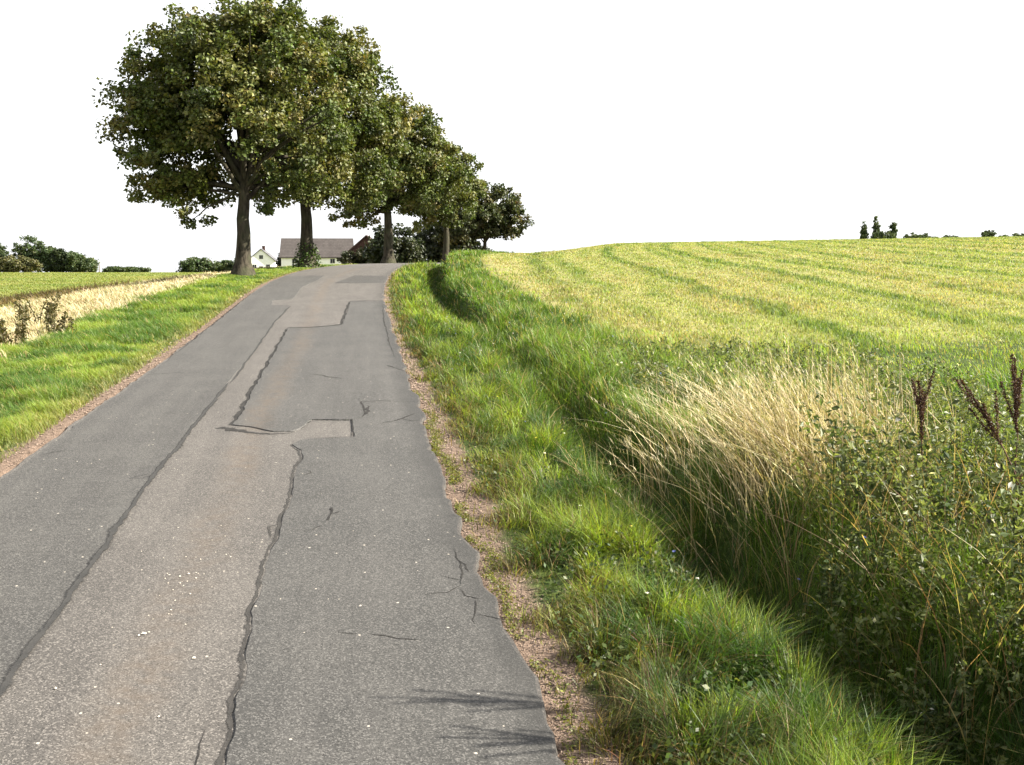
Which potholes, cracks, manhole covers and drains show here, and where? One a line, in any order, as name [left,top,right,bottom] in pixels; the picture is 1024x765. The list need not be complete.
crack [157,296,401,765]
crack [425,548,504,622]
crack [330,401,415,438]
